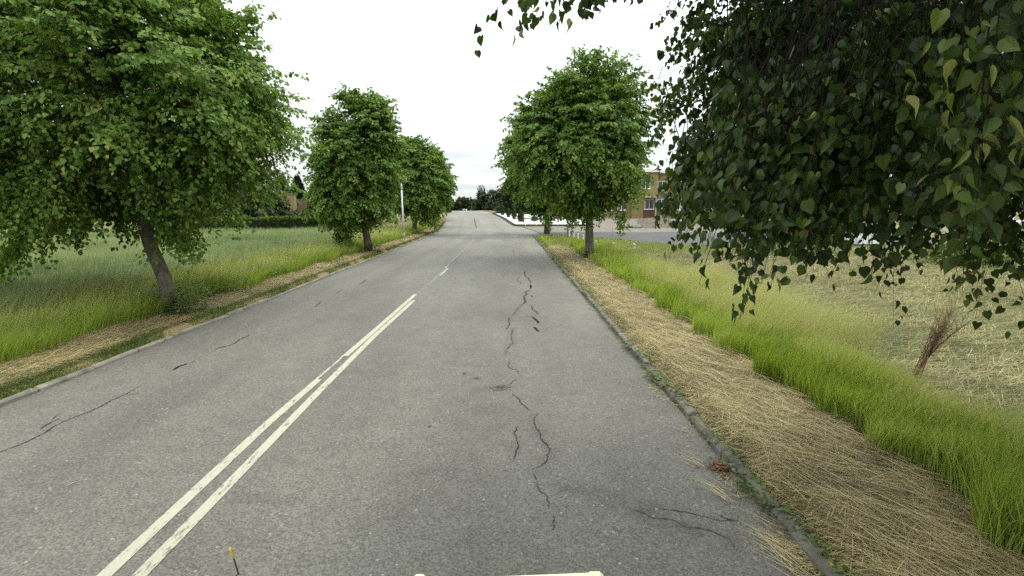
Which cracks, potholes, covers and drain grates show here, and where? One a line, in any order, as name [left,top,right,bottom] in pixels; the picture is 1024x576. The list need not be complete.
crack [0,386,139,452]
crack [506,272,555,530]
crack [633,507,740,543]
